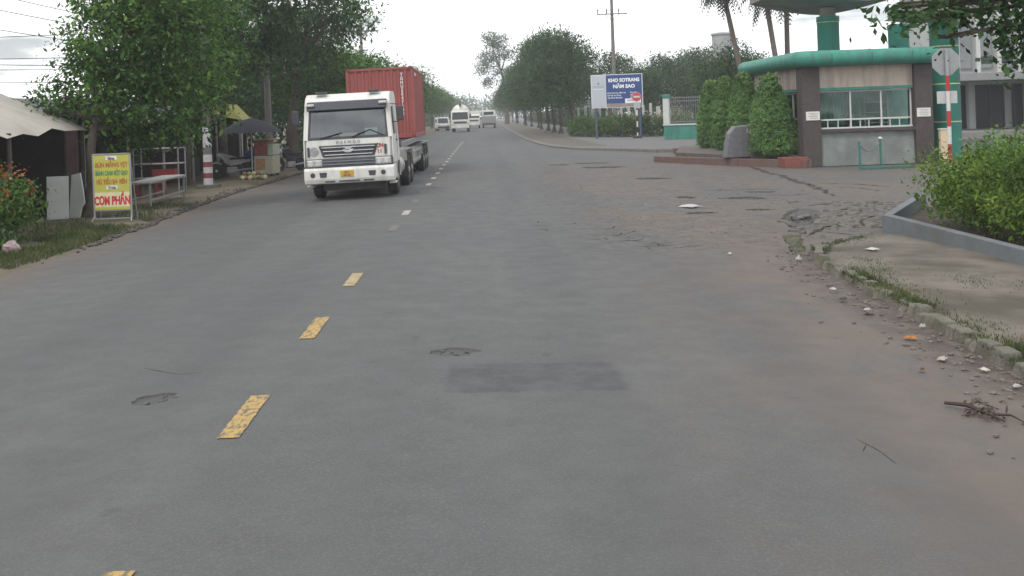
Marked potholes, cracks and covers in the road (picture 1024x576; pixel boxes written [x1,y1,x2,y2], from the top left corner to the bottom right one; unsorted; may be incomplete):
pothole [780,208,825,229]
pothole [131,393,181,406]
crack [720,167,888,237]
crack [532,221,701,249]
pothole [429,348,481,356]
